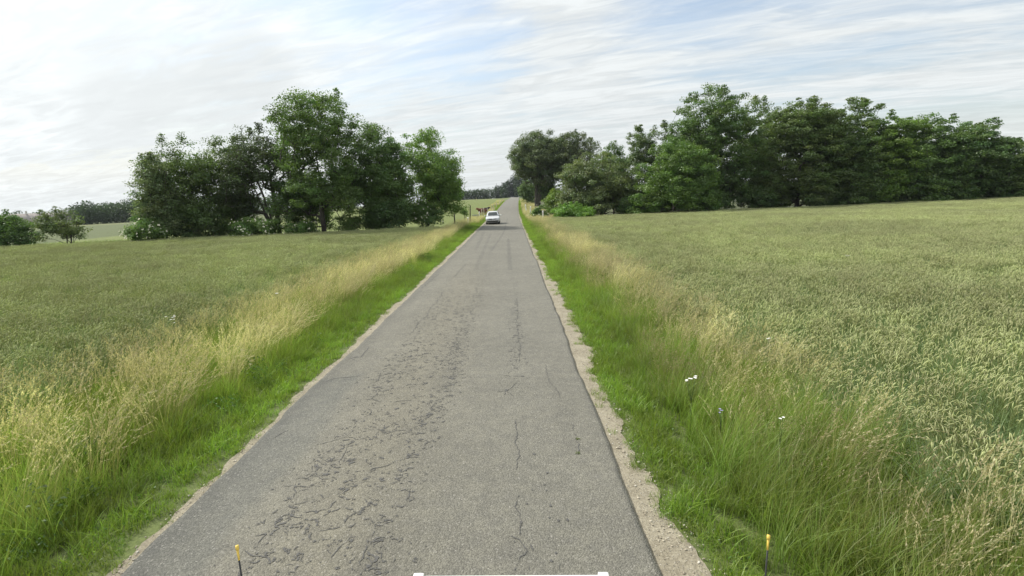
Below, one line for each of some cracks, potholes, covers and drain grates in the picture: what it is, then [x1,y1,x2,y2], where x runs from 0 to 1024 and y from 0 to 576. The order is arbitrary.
crack [507,281,569,570]
